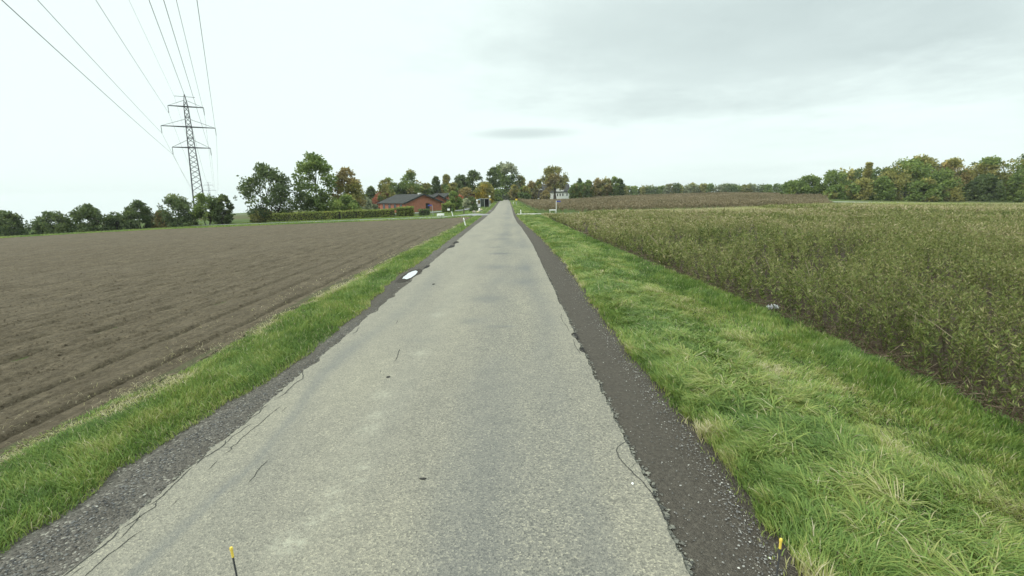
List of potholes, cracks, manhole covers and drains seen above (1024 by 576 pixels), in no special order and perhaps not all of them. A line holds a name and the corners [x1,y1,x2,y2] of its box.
crack [616,442,668,522]
crack [65,372,304,576]
